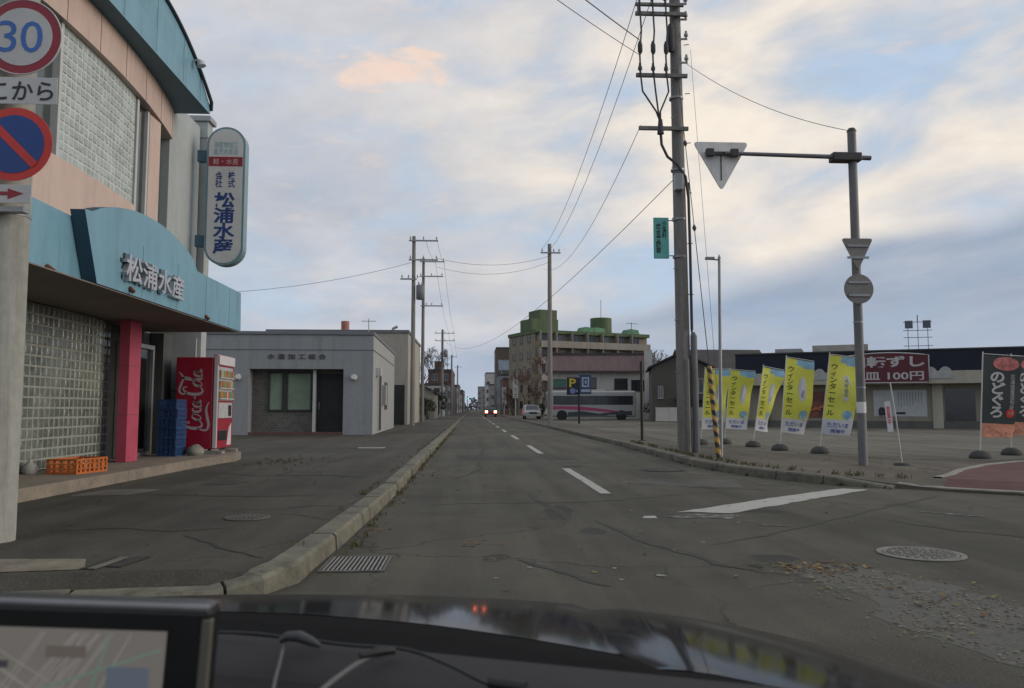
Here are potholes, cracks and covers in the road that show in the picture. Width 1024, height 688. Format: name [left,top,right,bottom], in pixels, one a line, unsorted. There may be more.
manhole cover [876,546,968,562]
crack [517,520,765,586]
crack [49,527,263,558]
drain grate [317,556,392,572]
crack [894,521,1024,537]
